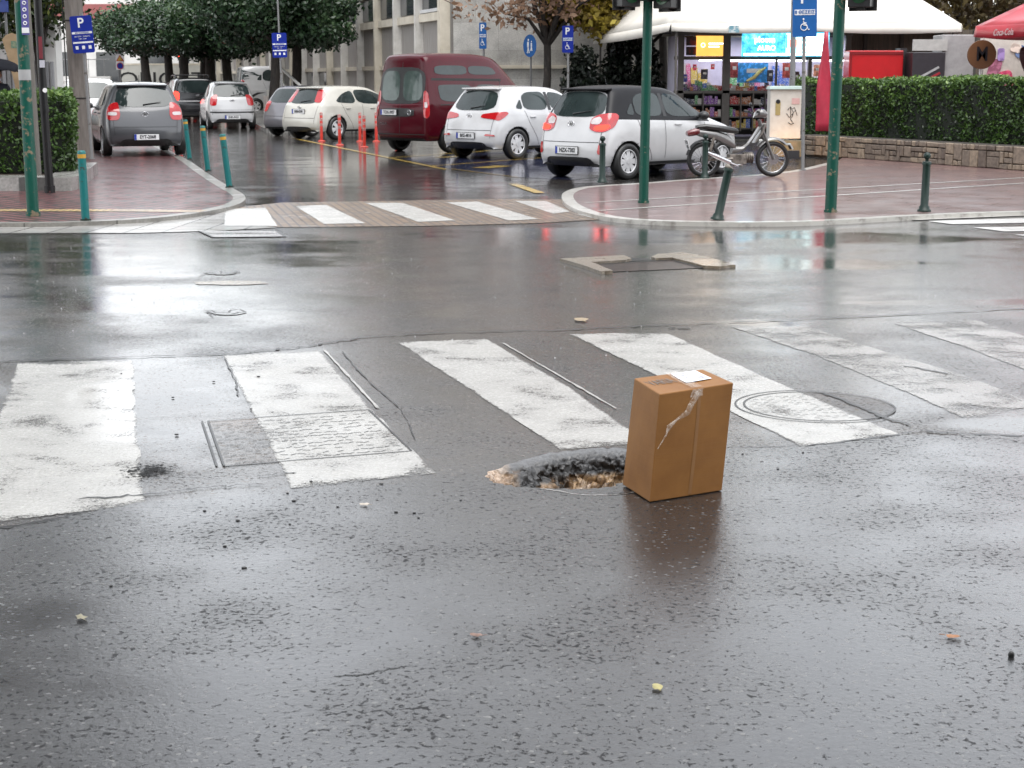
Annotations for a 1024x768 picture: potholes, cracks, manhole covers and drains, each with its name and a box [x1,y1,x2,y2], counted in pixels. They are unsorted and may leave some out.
crack [342,351,415,438]
crack [78,472,296,499]
manhole cover [201,409,412,466]
pothole [485,447,627,490]
manhole cover [560,252,735,274]
manhole cover [734,390,896,423]
crack [334,666,401,676]
